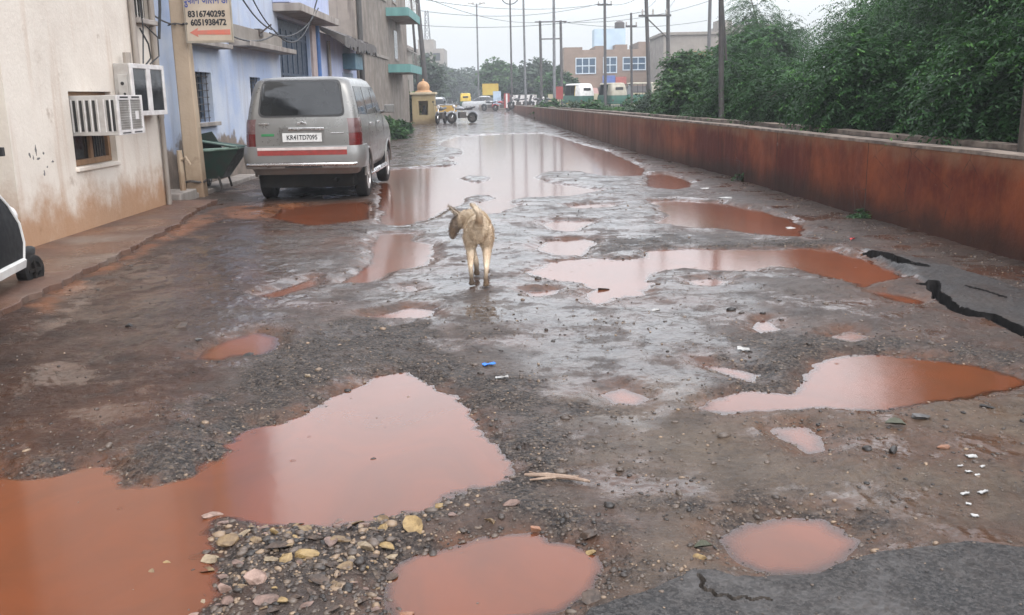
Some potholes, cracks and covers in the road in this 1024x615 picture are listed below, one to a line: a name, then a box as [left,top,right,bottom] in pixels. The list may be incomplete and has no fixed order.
crack [697,573,773,601]
pothole [645,198,811,236]
pothole [0,364,535,615]
pothole [538,218,600,231]
pothole [262,199,377,225]
crack [862,250,1024,338]
pothole [373,132,648,226]
pothole [686,348,1024,416]
pothole [518,244,912,305]
pothole [334,231,441,283]
pothole [184,327,289,361]
pothole [644,171,696,189]
